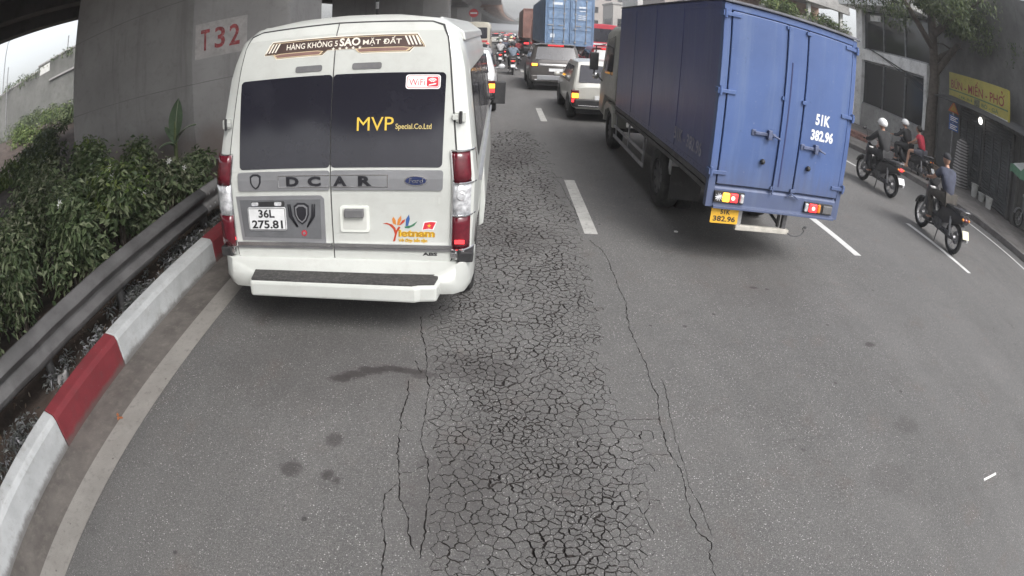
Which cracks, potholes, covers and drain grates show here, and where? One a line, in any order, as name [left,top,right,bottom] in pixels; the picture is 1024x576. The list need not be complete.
crack [381,129,716,576]
